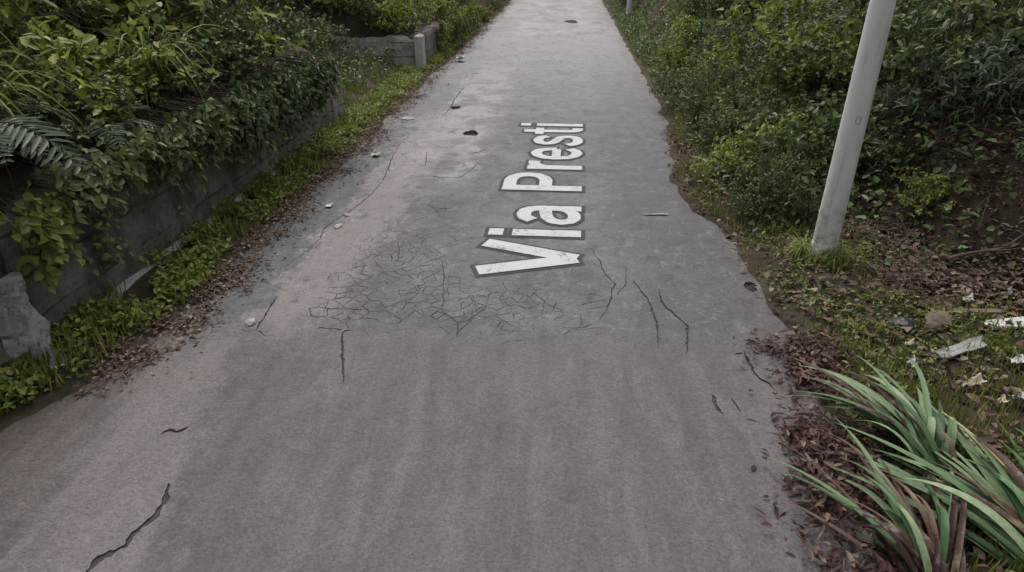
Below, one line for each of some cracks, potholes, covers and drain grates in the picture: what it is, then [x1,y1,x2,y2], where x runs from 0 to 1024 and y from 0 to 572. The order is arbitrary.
crack [287,134,403,266]
crack [712,350,778,416]
crack [162,426,189,434]
crack [309,198,612,383]
crack [579,251,689,352]
crack [86,484,171,572]
